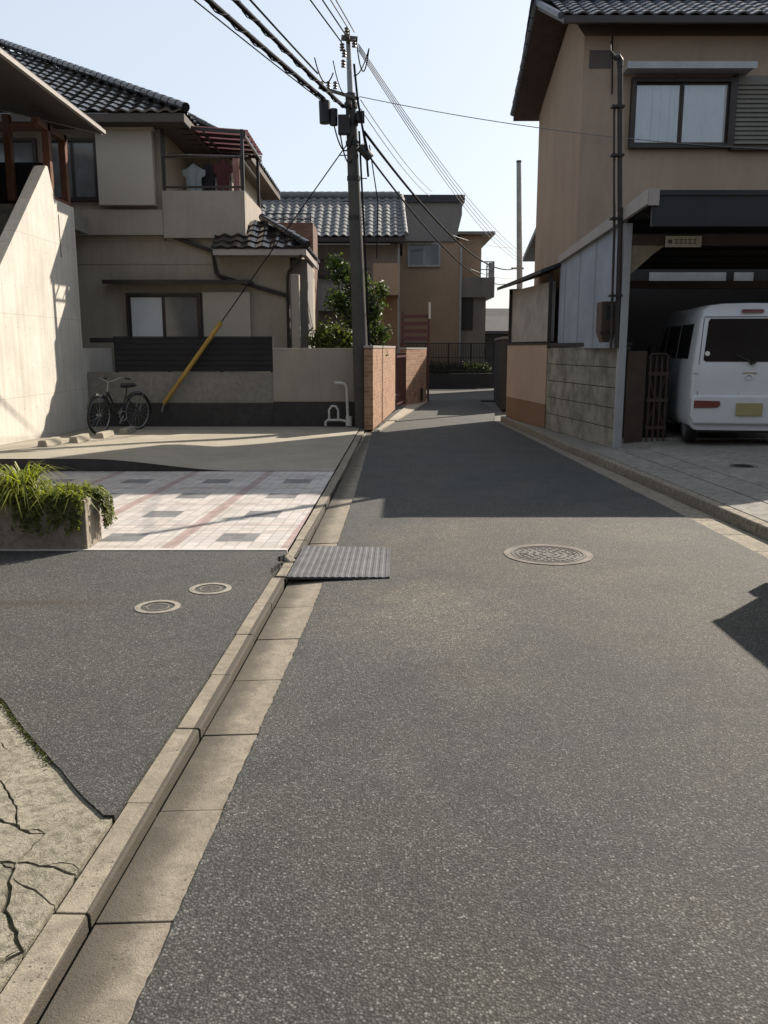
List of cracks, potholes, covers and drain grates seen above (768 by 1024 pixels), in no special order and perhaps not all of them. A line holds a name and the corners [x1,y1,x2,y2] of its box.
manhole cover [134,600,181,614]
crack [0,746,80,964]
manhole cover [189,583,232,595]
manhole cover [504,544,593,565]
